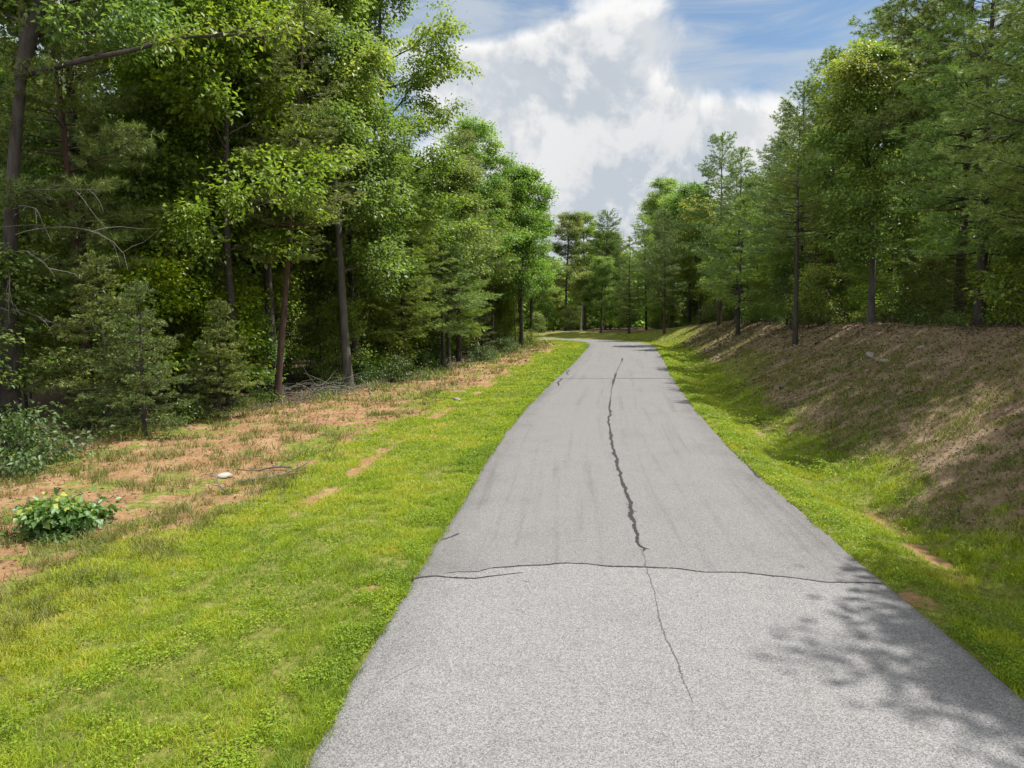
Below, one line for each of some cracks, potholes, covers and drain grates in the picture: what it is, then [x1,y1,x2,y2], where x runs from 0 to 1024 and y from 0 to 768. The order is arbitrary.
crack [412,358,882,702]
